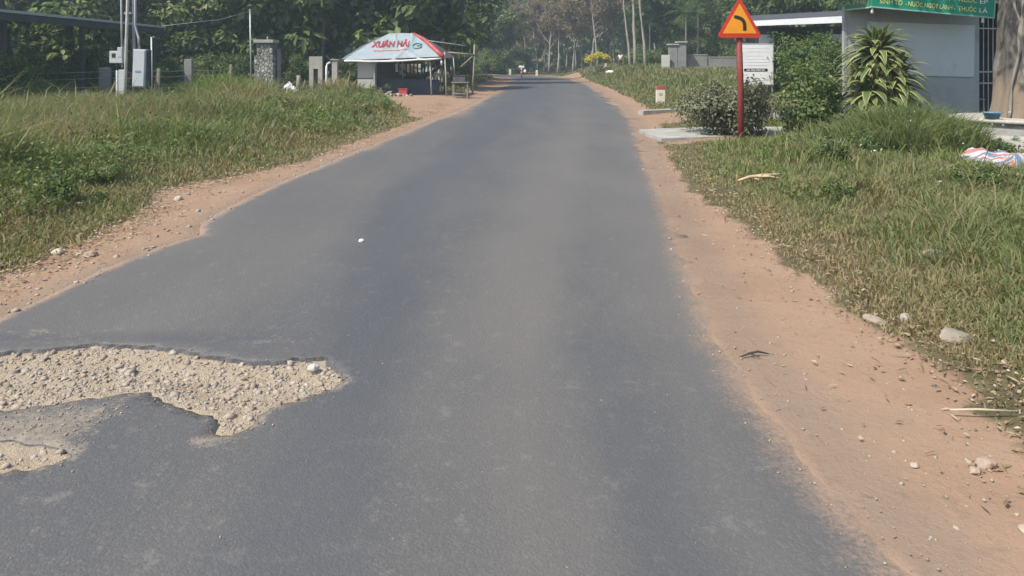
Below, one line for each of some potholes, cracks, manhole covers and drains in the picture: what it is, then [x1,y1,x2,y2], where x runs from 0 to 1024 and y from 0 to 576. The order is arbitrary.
pothole [0,343,348,436]
pothole [0,440,72,475]
